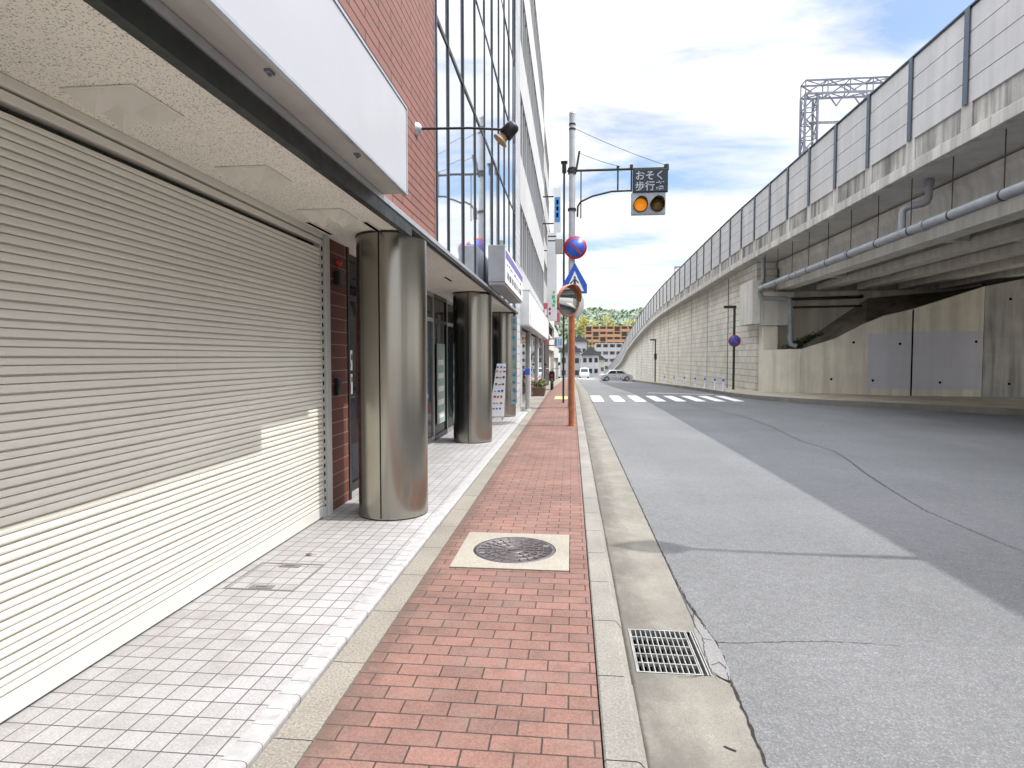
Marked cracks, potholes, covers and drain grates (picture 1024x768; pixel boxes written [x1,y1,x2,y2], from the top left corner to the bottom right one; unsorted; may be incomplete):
drain grate [628,629,712,676]
crack [678,613,898,680]
manhole cover [449,532,569,572]
crack [685,402,1020,550]
utility cover [223,562,325,591]
